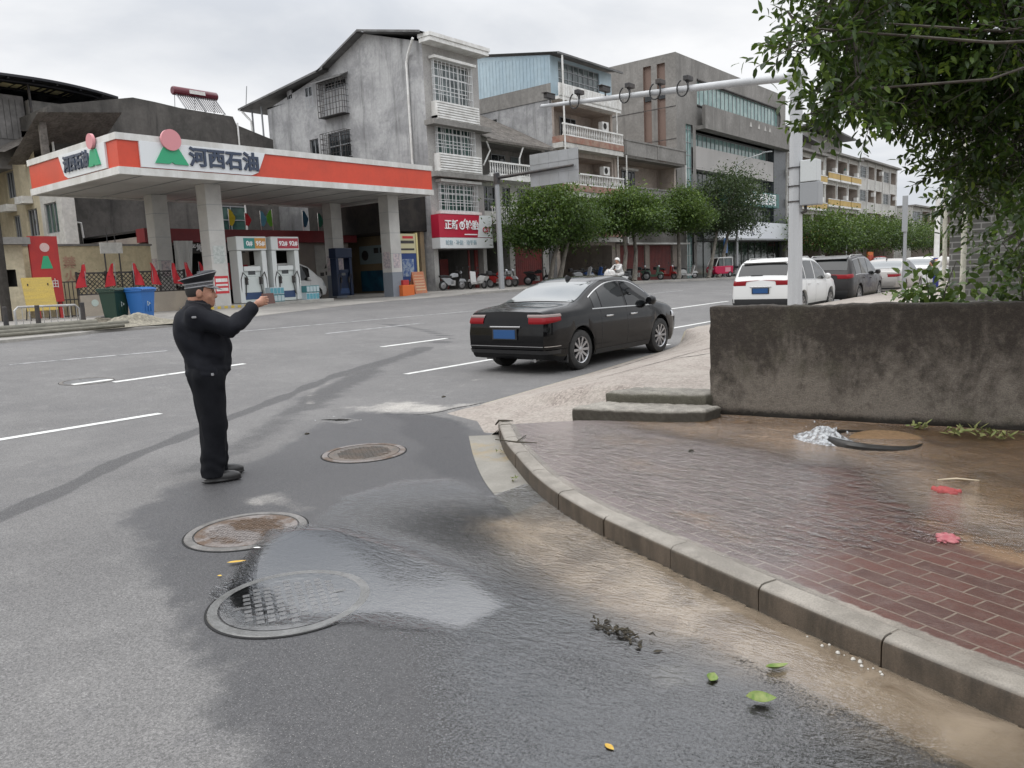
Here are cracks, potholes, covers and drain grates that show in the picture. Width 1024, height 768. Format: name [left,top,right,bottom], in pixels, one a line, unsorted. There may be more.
manhole cover [320,443,407,464]
manhole cover [204,570,373,640]
manhole cover [182,512,309,553]
manhole cover [827,430,926,451]
manhole cover [58,377,115,386]
